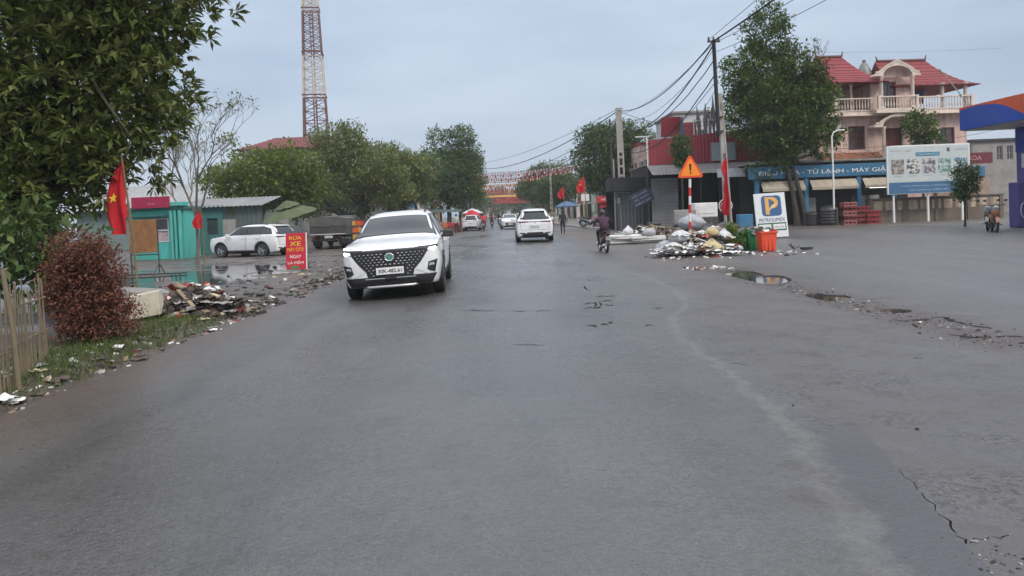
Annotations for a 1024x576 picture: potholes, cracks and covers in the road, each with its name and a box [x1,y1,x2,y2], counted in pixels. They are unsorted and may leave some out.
crack [896,317,1022,338]
pothole [723,271,792,284]
pothole [806,293,851,301]
crack [899,469,1009,544]
